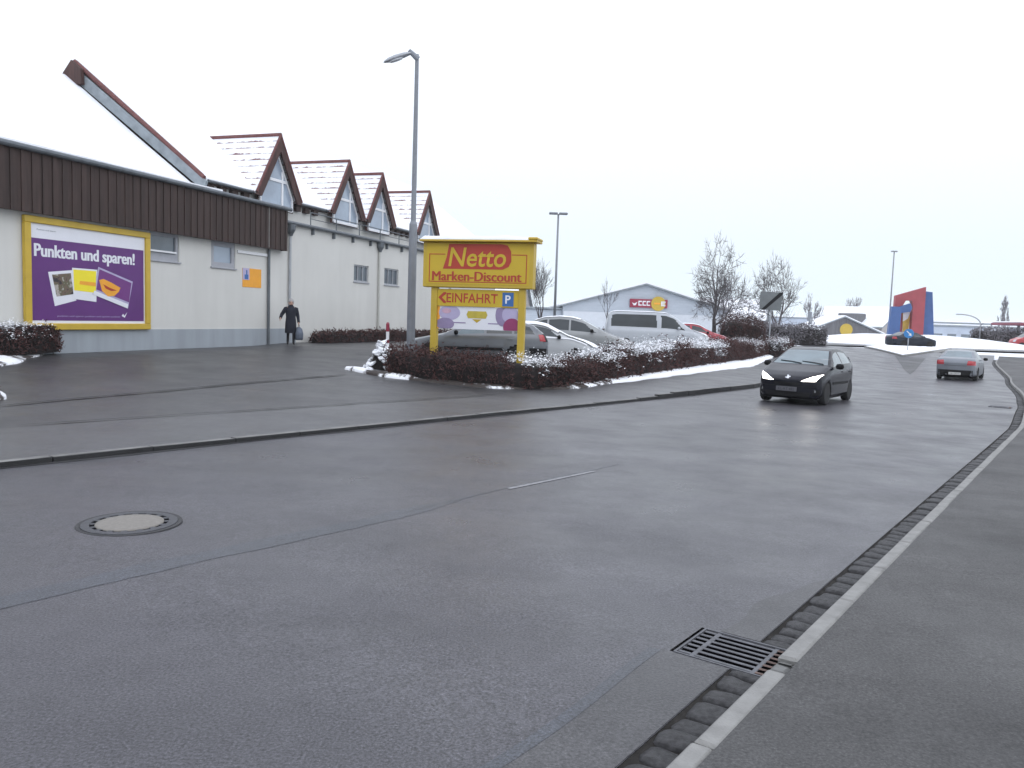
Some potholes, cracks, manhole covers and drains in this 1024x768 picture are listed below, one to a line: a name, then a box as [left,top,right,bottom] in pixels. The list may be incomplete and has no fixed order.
manhole cover [74,511,183,537]
drain grate [673,628,787,694]
